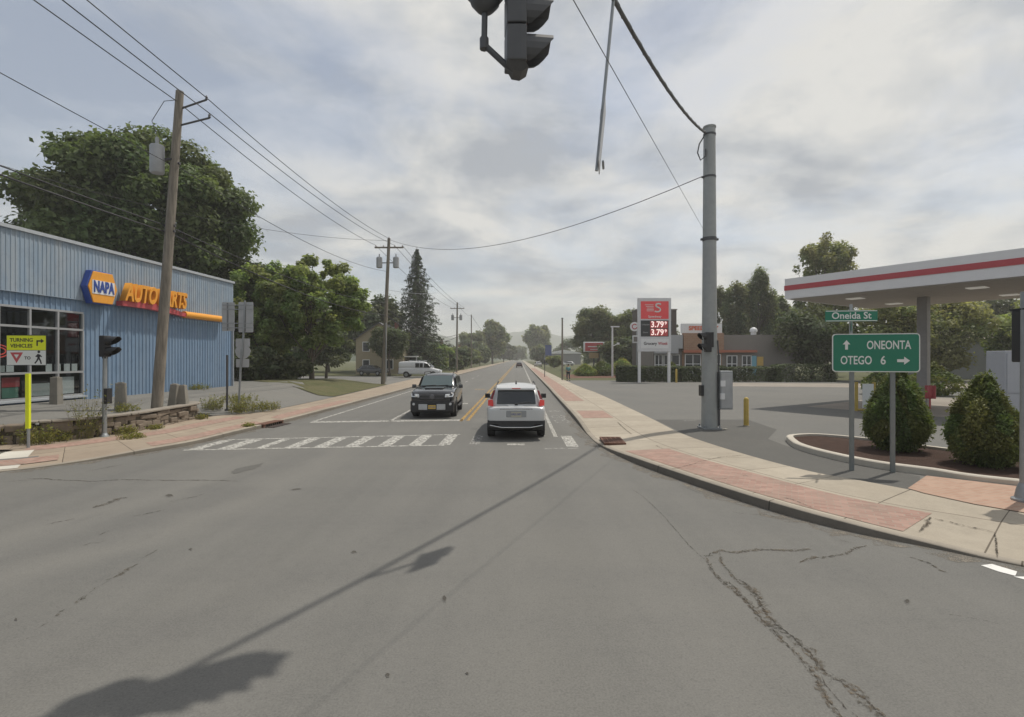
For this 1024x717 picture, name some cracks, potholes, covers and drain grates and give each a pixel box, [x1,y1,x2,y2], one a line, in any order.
drain grate [255,420,291,428]
crack [641,464,885,717]
